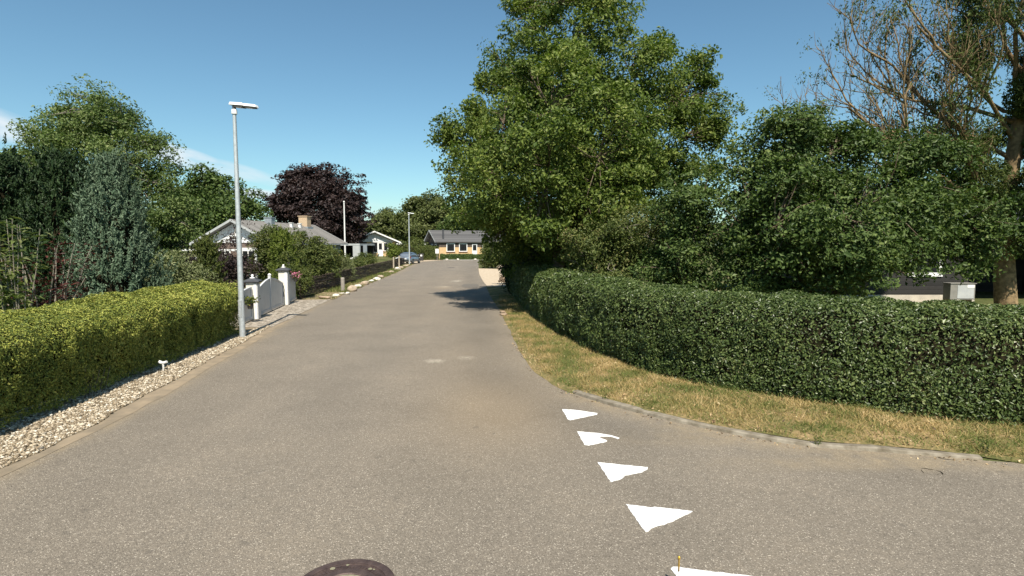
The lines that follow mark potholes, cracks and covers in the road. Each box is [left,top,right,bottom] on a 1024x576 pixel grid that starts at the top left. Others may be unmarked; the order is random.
manhole cover [304,559,394,576]
